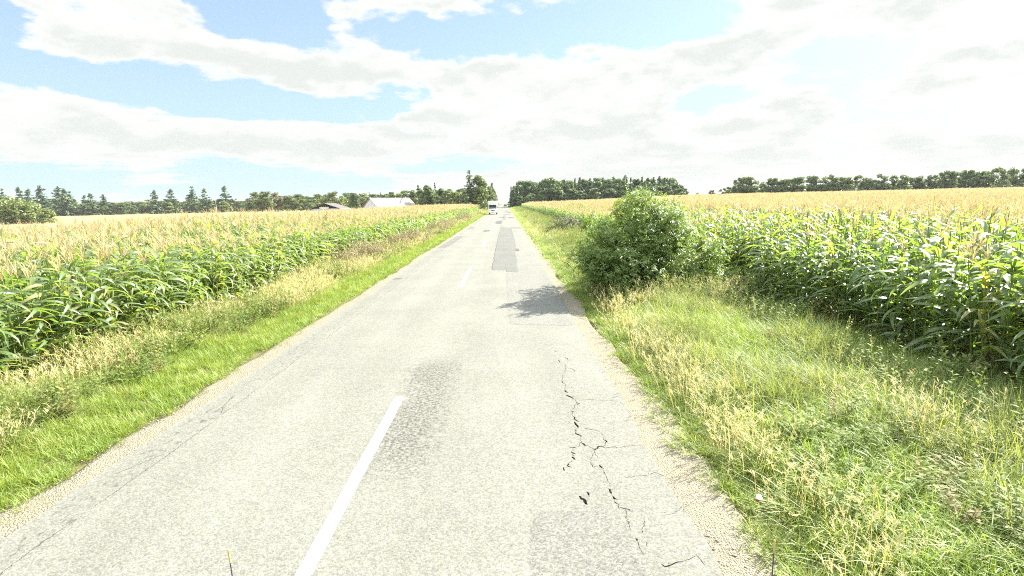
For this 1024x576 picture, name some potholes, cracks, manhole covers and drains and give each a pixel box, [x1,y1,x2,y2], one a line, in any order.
crack [556,351,662,554]
